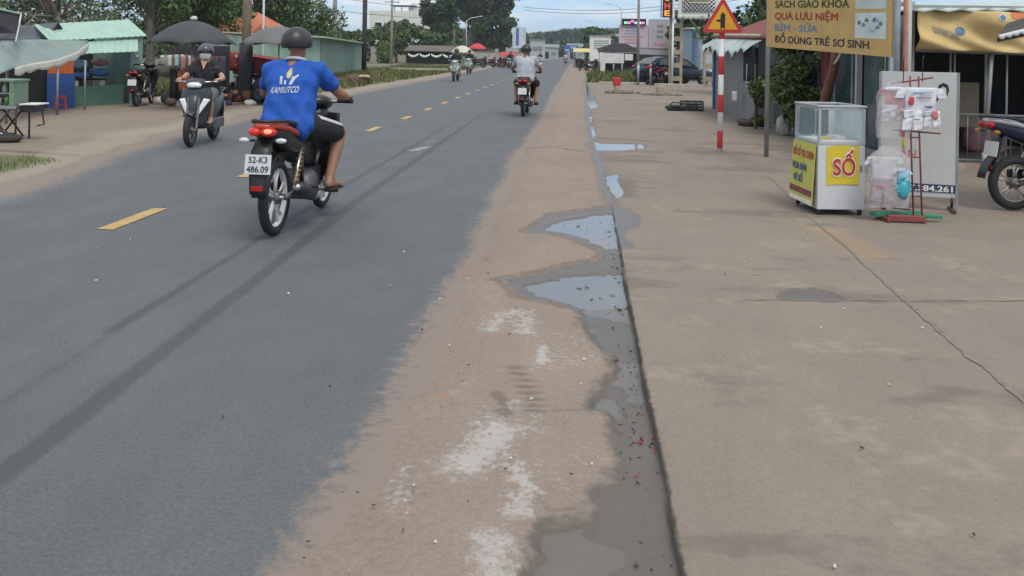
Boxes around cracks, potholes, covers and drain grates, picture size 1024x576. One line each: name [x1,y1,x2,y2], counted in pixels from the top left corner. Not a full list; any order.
pothole [493,250,633,325]
pothole [521,205,621,254]
